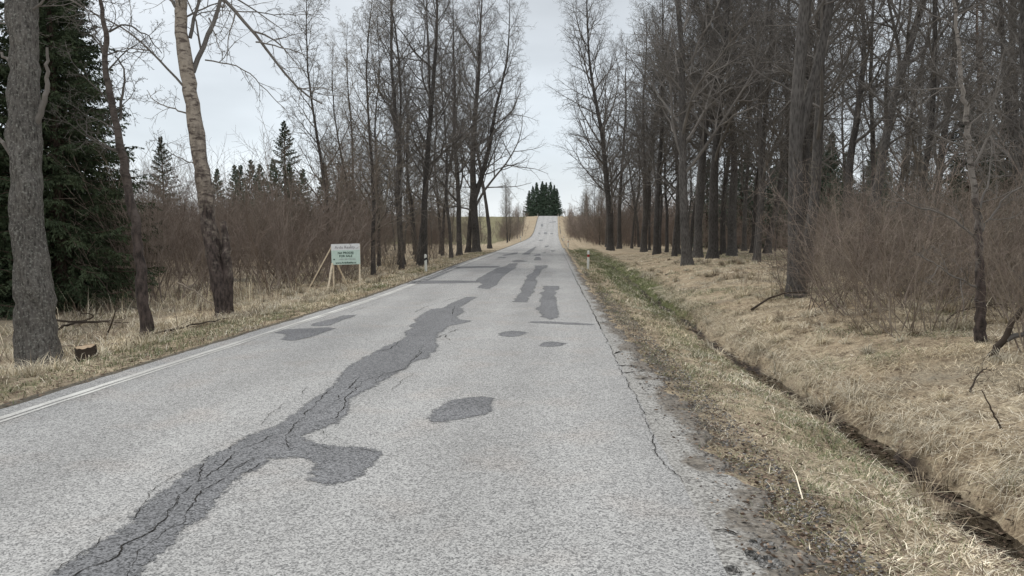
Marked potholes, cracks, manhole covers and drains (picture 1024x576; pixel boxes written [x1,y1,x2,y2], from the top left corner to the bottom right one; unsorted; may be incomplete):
crack [565,257,683,481]
crack [59,306,455,576]
